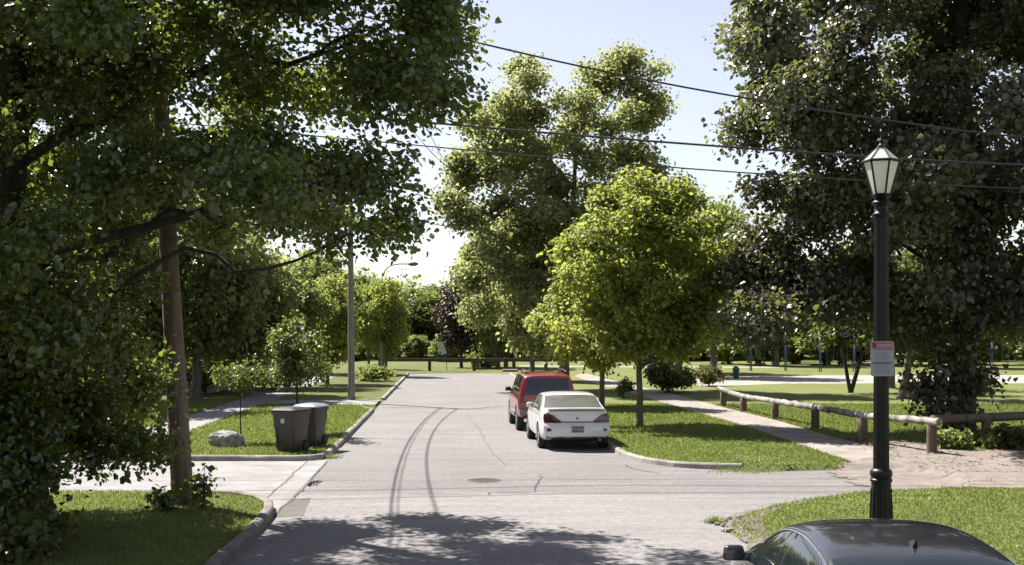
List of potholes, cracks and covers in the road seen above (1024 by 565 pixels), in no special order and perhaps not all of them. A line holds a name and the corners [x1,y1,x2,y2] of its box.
crack [394,406,507,467]
